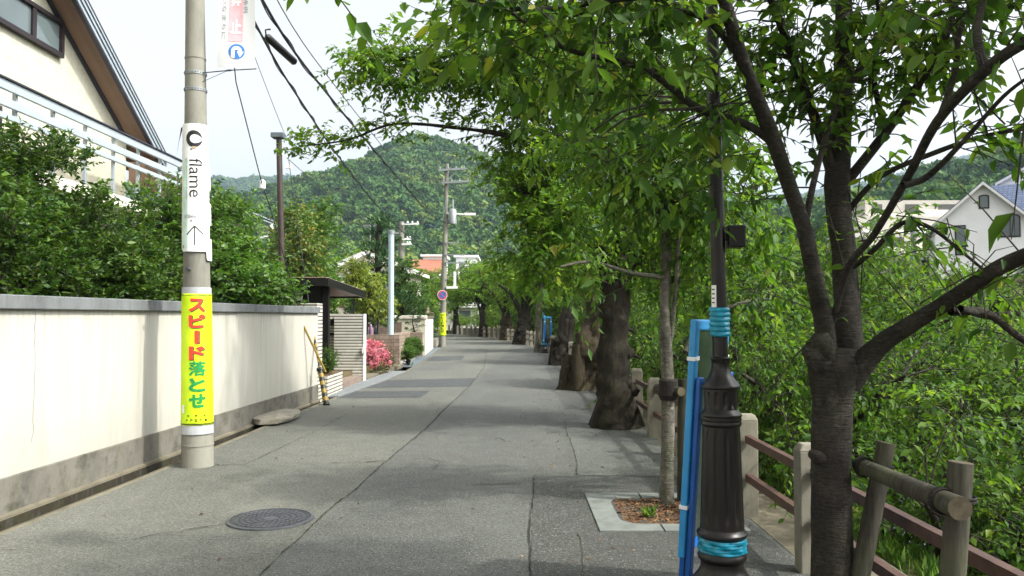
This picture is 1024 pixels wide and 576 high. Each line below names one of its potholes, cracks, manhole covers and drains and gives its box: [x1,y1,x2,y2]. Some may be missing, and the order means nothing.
manhole cover [226,508,314,531]
crack [502,477,535,576]
